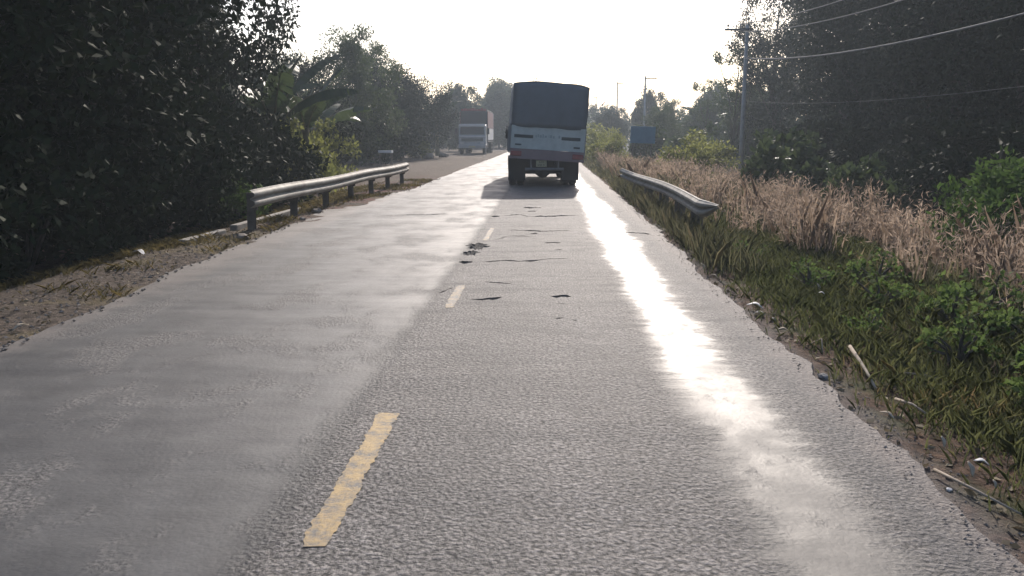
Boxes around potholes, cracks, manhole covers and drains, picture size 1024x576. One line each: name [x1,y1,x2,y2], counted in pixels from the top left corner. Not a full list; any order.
crack [487,207,572,262]
crack [473,282,510,300]
